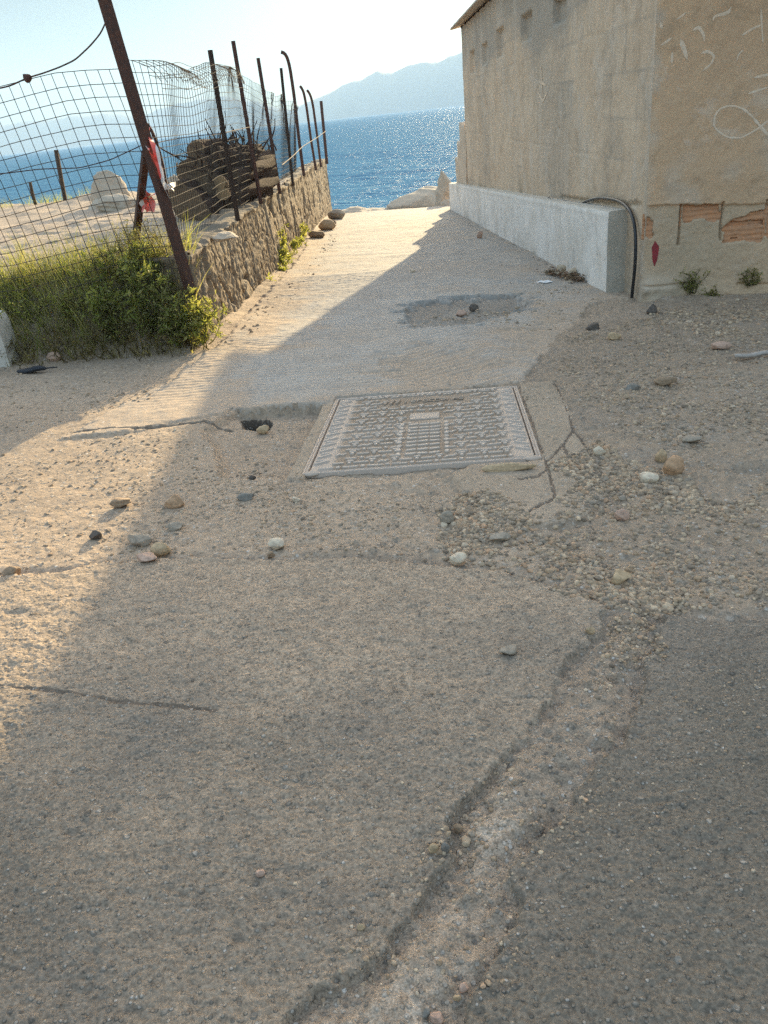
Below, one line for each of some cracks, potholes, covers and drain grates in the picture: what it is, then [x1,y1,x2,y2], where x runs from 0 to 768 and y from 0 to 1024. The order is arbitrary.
pothole [239,419,273,431]
crack [517,383,601,513]
crack [0,684,218,712]
manhole cover [302,386,542,478]
crack [72,419,234,434]
